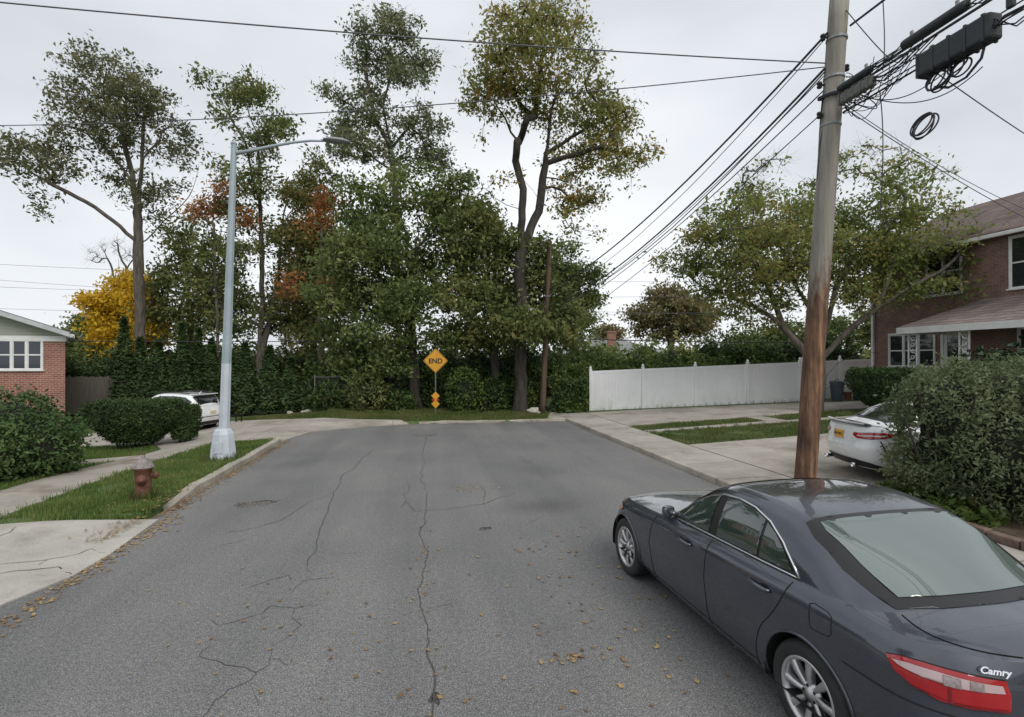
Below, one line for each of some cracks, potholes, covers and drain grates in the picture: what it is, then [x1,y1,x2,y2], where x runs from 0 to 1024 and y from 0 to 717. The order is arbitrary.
pothole [234,500,282,508]
crack [403,437,511,717]
crack [3,549,104,576]
crack [199,453,370,717]
